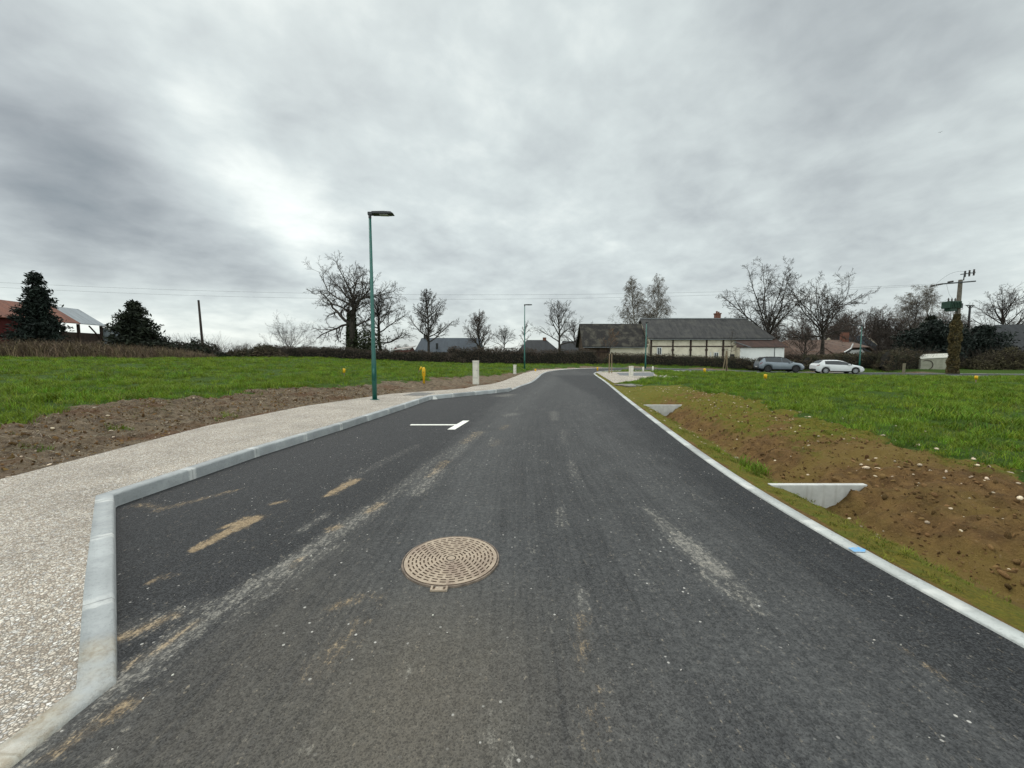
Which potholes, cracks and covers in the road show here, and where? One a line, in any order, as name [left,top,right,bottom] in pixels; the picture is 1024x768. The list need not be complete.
manhole cover [401,536,499,592]
